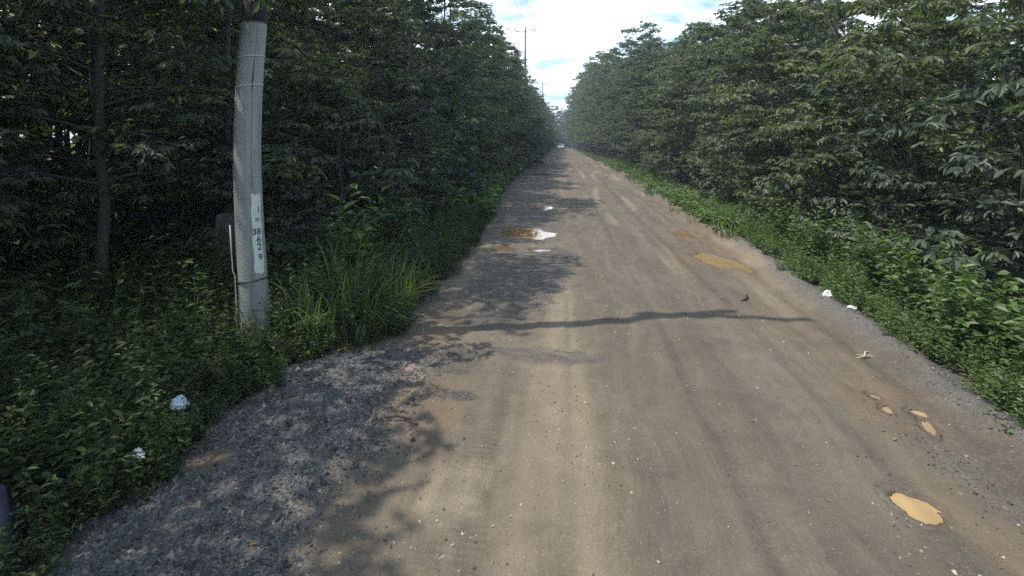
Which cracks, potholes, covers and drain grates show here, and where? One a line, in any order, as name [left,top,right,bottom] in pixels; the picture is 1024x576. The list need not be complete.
pothole [667,229,713,241]
pothole [484,243,530,253]
pothole [904,407,932,419]
pothole [875,484,958,533]
pothole [916,417,942,441]
pothole [878,404,897,417]
pothole [678,248,769,282]
pothole [484,224,574,243]
